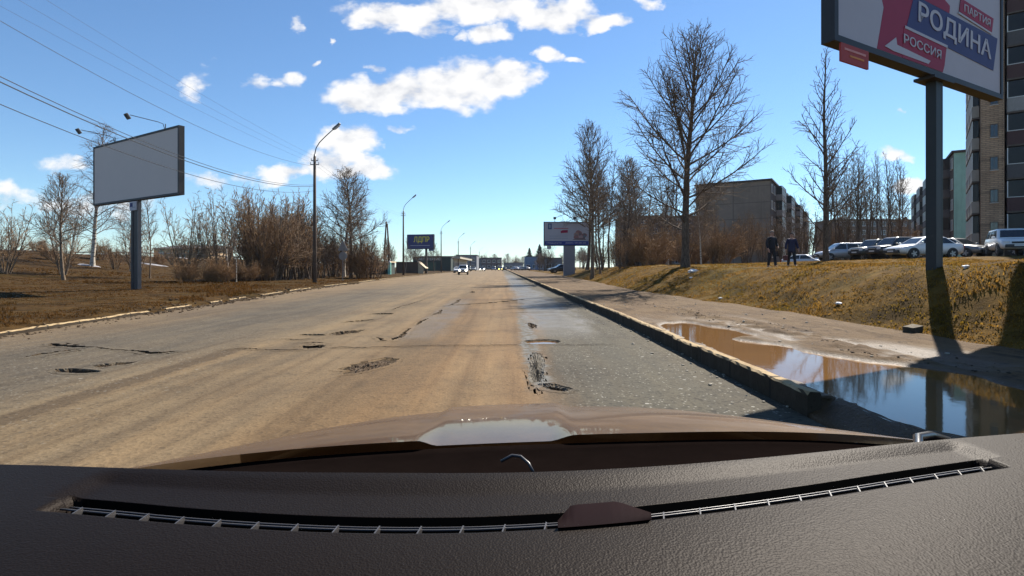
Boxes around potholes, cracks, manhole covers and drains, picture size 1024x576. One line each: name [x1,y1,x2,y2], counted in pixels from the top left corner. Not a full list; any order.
crack [14,342,189,359]
crack [216,283,616,351]
pothole [530,381,581,394]
pothole [522,352,551,395]
pothole [329,357,403,376]
